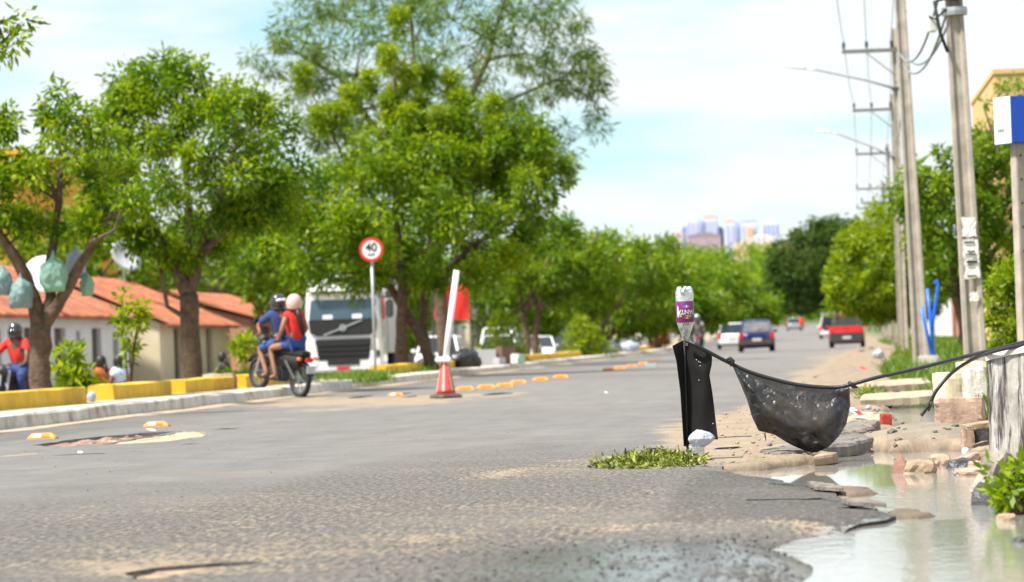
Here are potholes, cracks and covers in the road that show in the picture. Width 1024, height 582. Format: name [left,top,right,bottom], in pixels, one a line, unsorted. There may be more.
pothole [37,431,176,447]
pothole [103,431,212,445]
